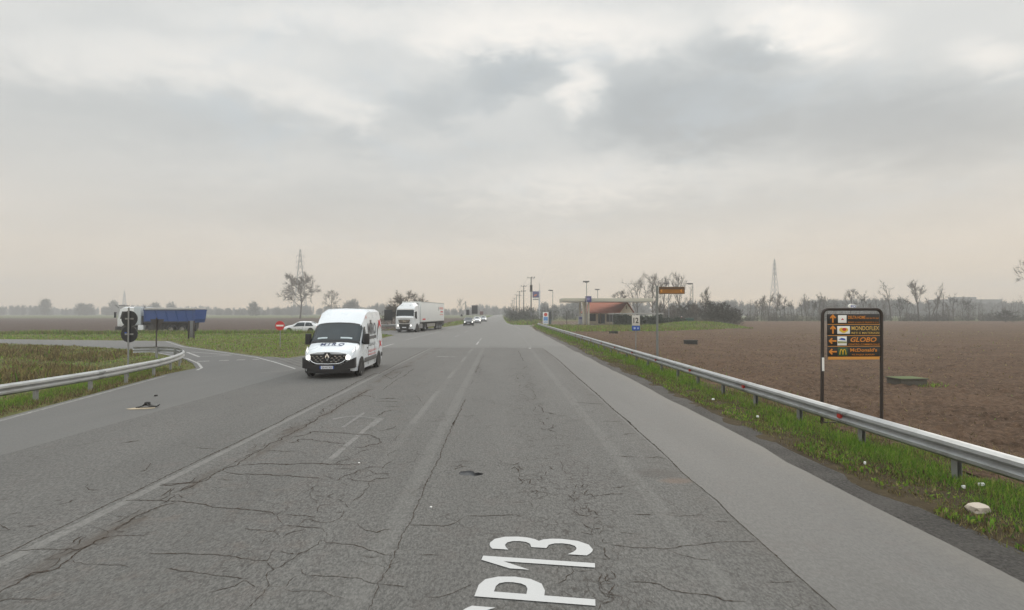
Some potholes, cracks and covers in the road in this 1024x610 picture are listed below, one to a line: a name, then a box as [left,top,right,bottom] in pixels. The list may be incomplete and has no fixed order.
crack [0,361,755,608]
